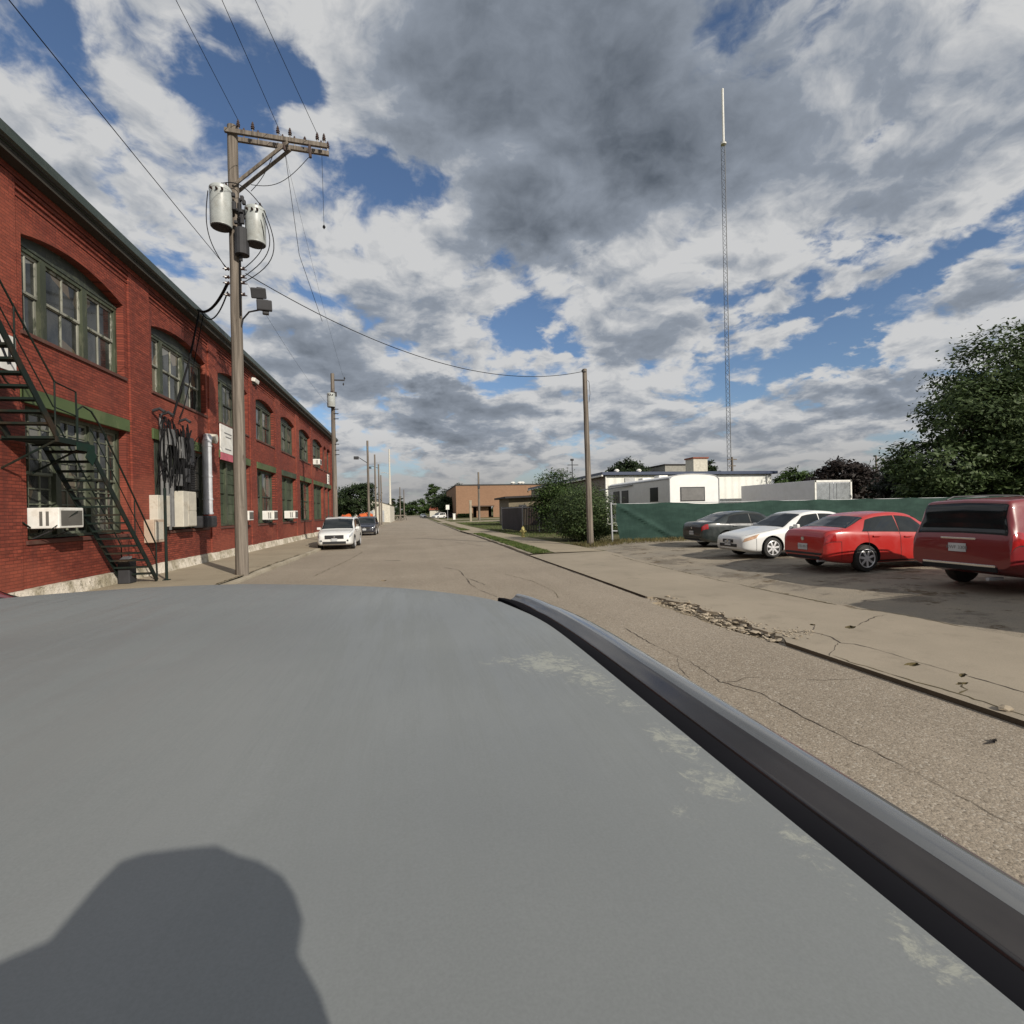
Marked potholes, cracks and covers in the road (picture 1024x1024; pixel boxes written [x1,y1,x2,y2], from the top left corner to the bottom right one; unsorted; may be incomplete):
crack [627,629,1021,829]
pothole [653,602,780,643]
